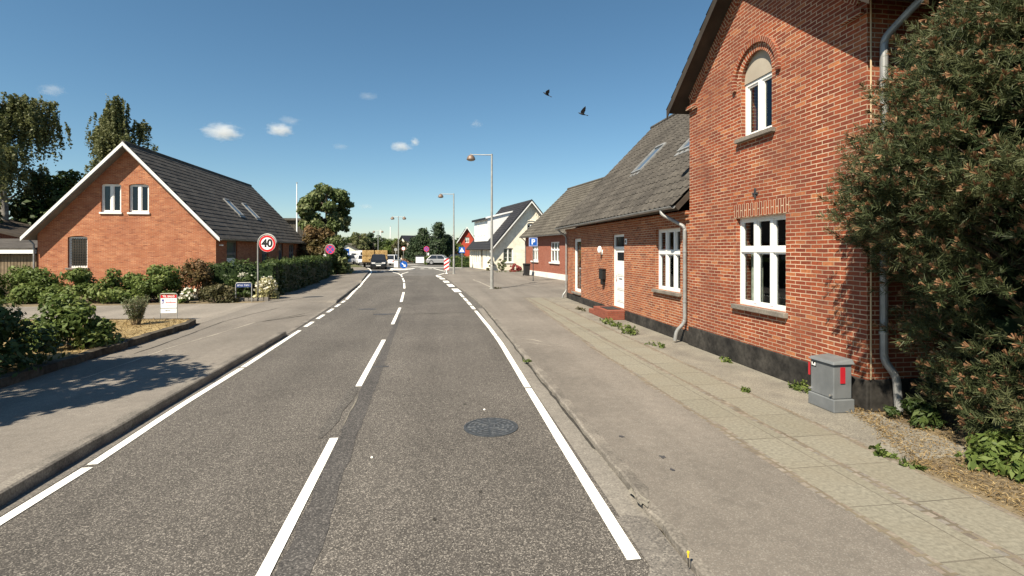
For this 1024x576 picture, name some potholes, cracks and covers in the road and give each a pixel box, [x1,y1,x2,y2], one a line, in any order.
manhole cover [464,418,518,437]
crack [318,386,358,438]
